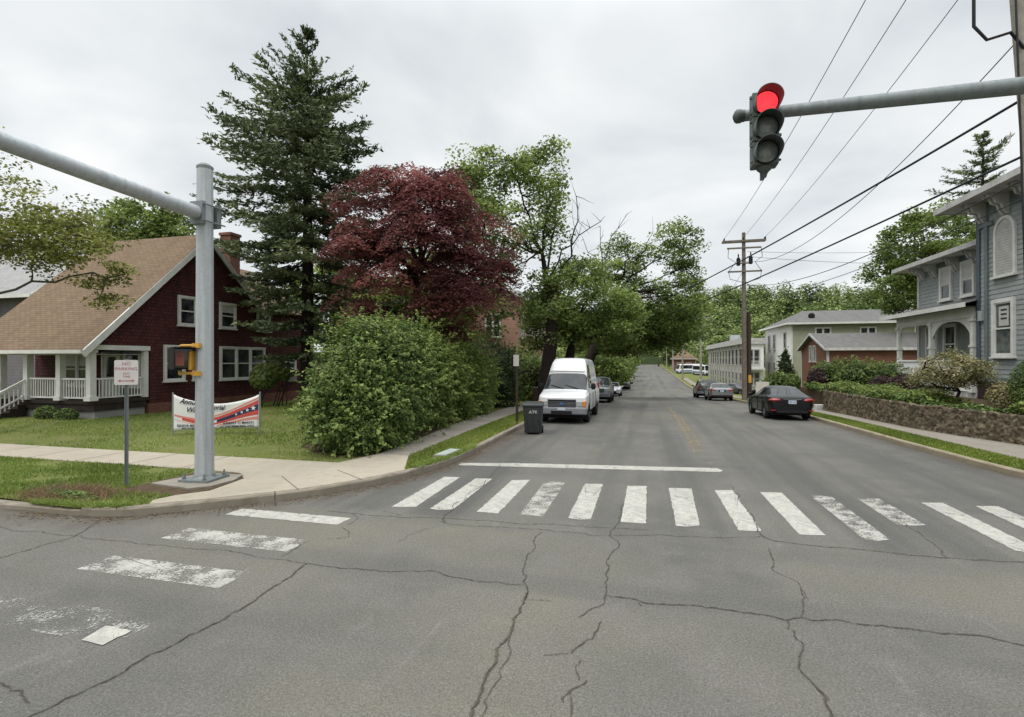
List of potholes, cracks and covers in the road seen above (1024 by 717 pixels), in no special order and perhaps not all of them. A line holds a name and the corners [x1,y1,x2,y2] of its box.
crack [0,529,550,717]
crack [548,485,1022,717]
